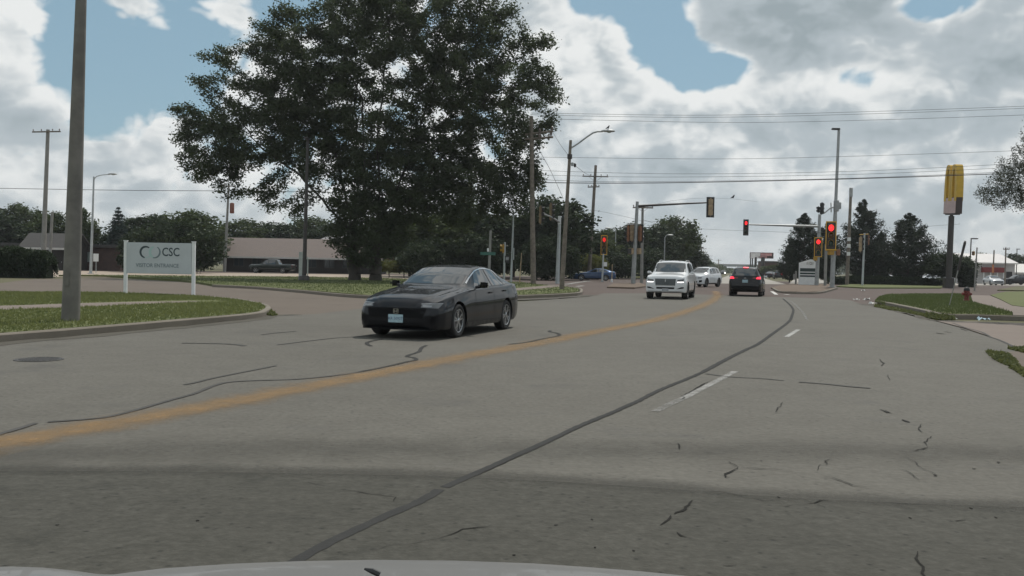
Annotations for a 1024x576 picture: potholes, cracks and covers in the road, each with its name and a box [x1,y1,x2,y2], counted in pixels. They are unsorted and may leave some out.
crack [915,551,925,576]
crack [660,451,926,537]
